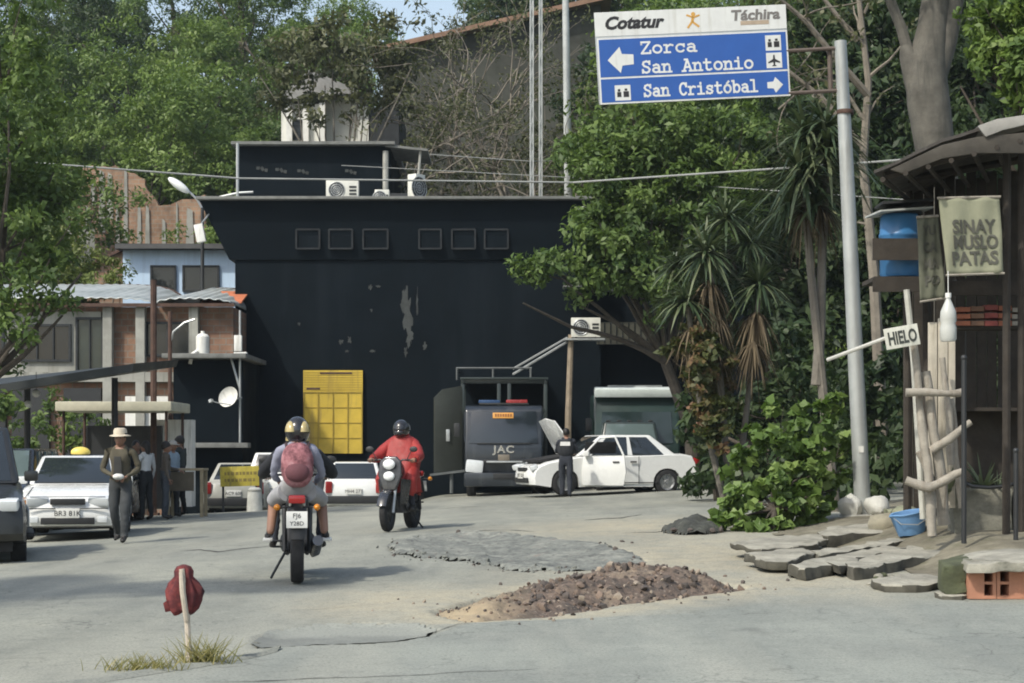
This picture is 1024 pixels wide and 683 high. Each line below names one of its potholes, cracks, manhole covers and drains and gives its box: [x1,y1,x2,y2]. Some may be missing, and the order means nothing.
pothole [371,561,790,625]
